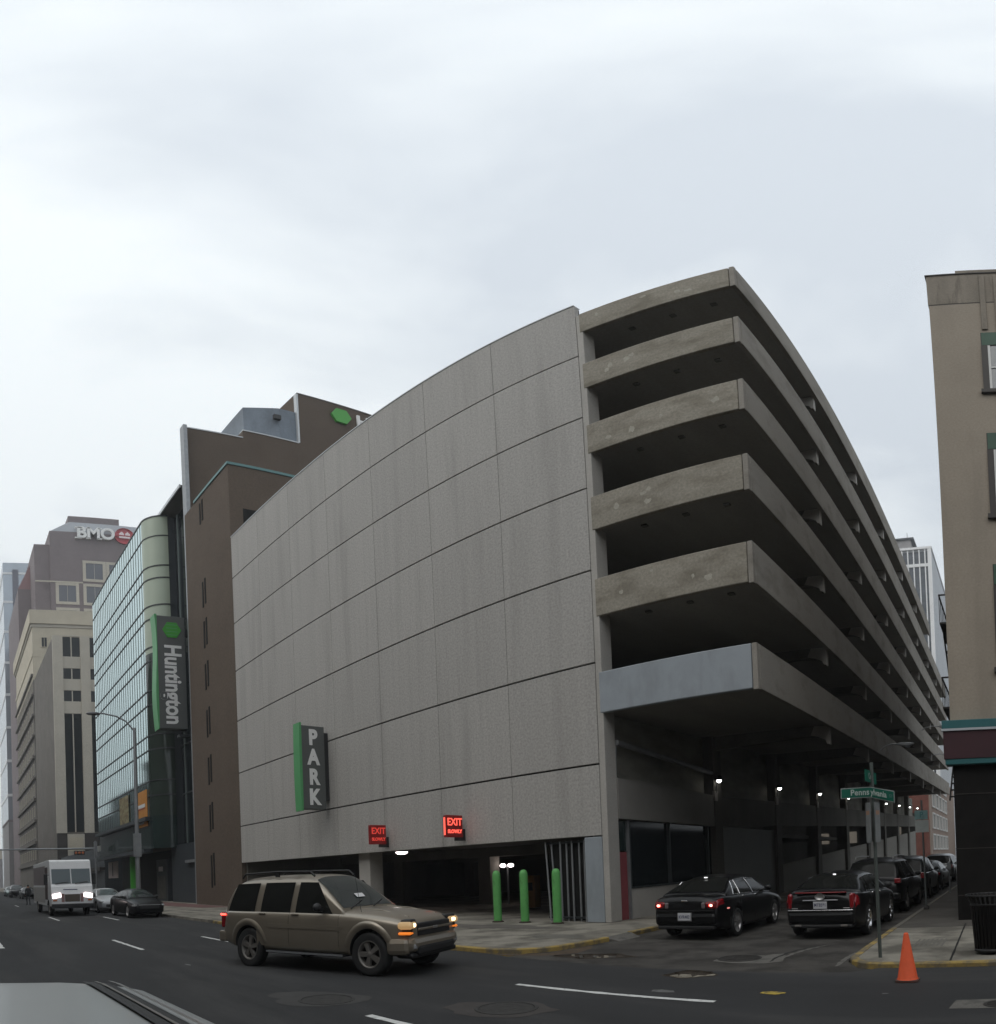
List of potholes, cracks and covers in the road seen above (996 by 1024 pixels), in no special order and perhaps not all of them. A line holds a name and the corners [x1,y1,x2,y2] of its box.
manhole cover [268,991,372,1006]
manhole cover [442,1001,560,1018]
manhole cover [714,954,786,963]
